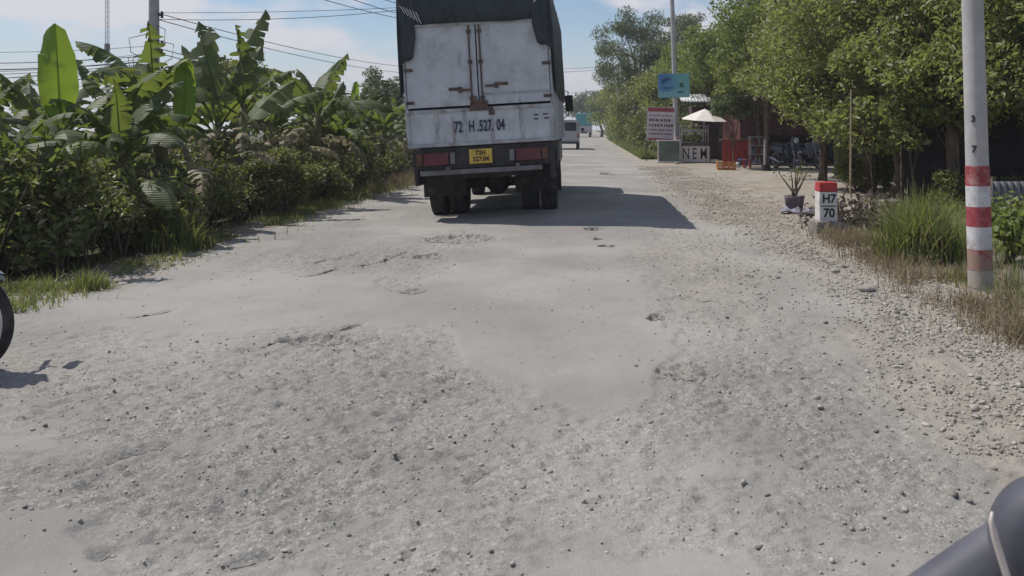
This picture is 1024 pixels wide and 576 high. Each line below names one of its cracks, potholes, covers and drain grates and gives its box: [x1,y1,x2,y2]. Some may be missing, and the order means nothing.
pothole [420,234,496,244]
crack [309,252,407,277]
